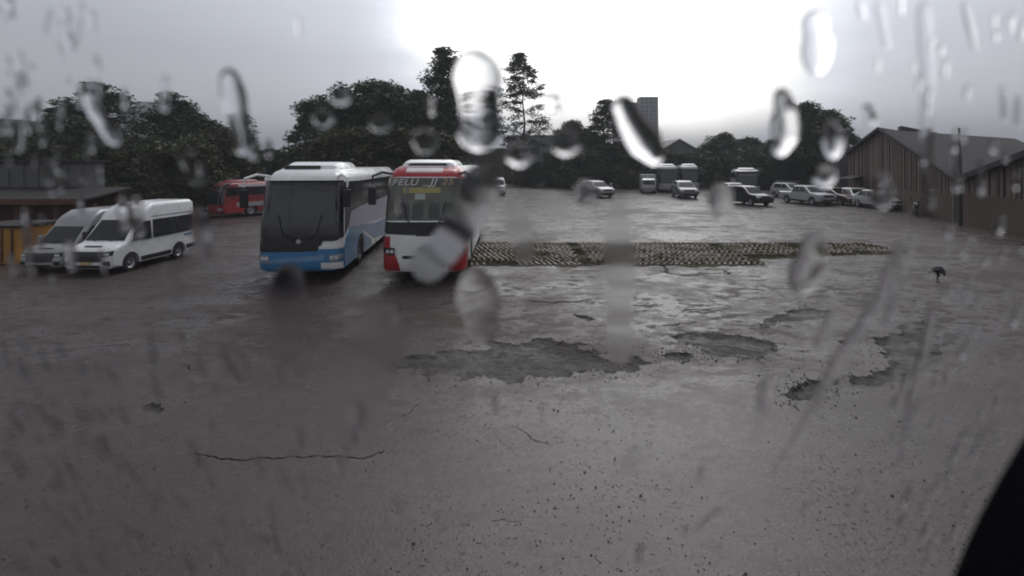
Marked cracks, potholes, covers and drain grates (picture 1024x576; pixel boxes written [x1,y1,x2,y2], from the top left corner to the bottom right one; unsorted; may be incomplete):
pothole [751,308,829,329]
pothole [849,320,958,387]
pothole [141,402,165,414]
pothole [784,379,838,401]
pothole [396,338,652,385]
crack [196,450,385,461]
pothole [663,352,694,362]
pothole [669,332,779,359]
